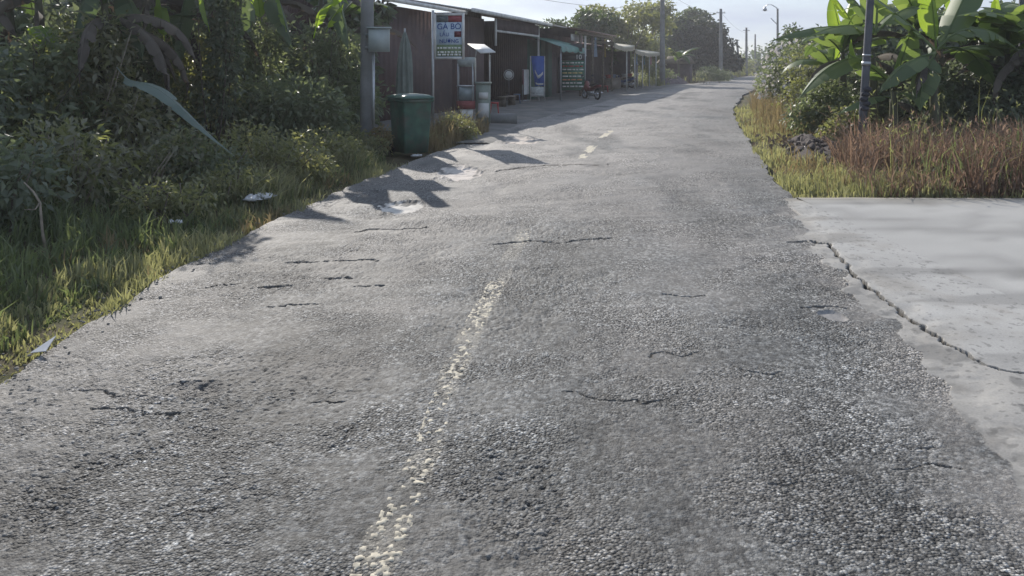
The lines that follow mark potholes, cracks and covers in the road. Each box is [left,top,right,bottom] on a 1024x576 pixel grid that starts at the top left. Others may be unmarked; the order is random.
pothole [816,309,849,322]
crack [786,240,1023,374]
pothole [378,199,426,215]
crack [892,446,961,470]
crack [492,237,613,245]
crack [567,391,668,405]
crack [205,258,385,308]
crack [83,389,181,420]
pothole [433,164,484,182]
